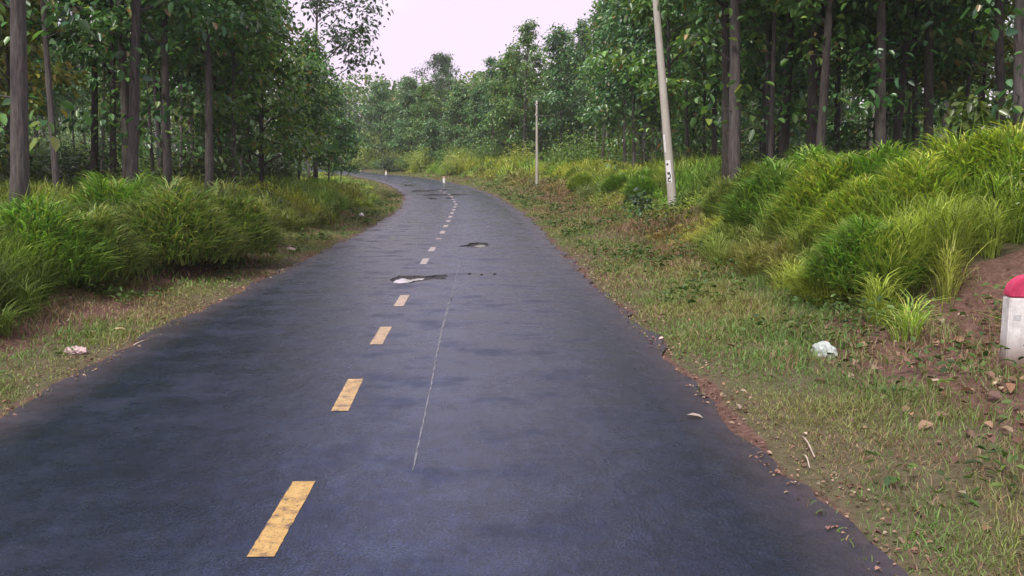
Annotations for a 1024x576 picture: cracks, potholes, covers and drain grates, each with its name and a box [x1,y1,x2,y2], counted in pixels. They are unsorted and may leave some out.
pothole [390,275,447,284]
